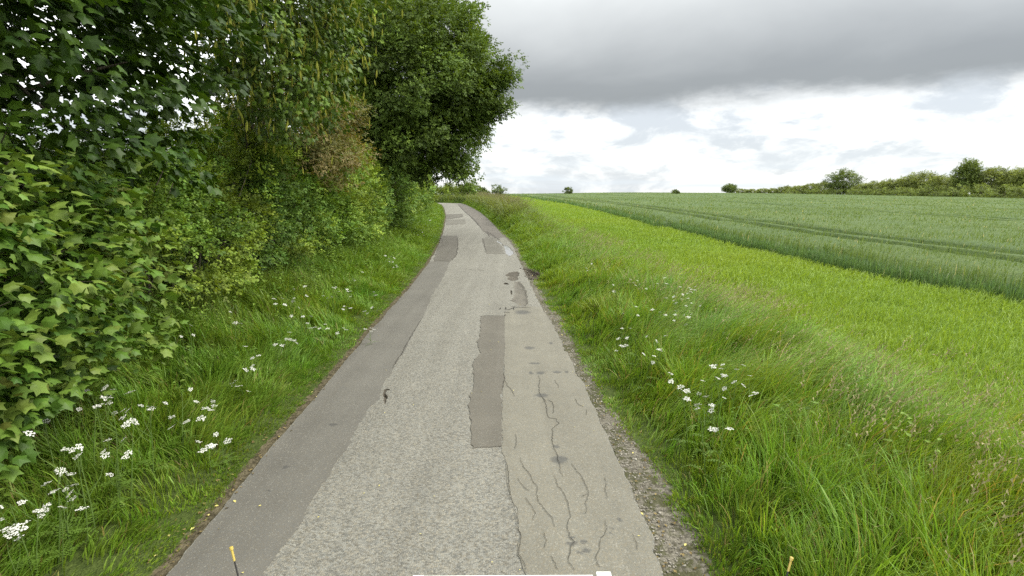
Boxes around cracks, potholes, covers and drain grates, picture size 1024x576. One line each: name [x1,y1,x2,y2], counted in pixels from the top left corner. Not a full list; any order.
pothole [520,268,543,280]
crack [516,375,607,569]
